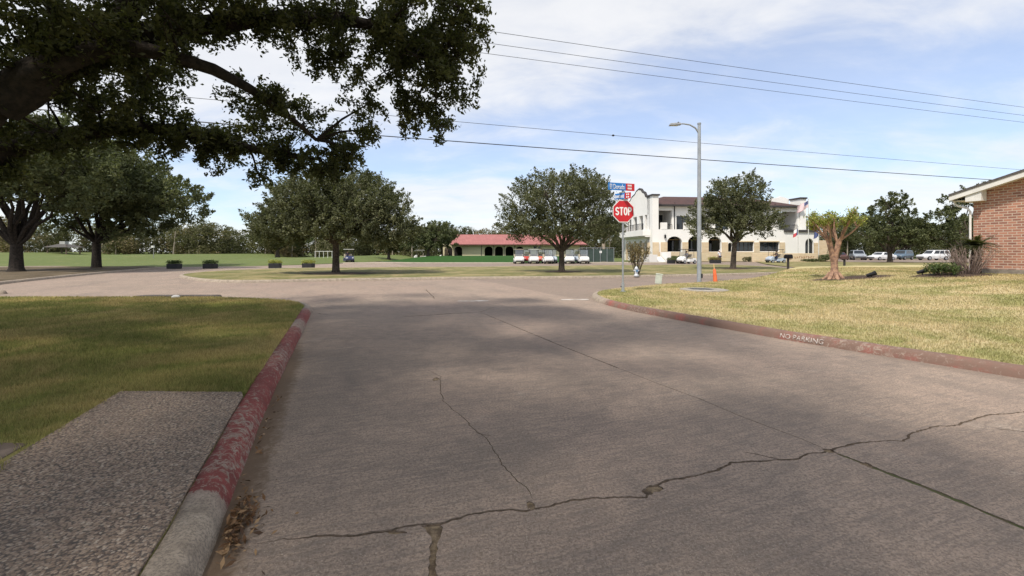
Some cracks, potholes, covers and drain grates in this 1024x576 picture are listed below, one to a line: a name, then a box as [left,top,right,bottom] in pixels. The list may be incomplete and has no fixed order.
crack [257,370,1024,576]
